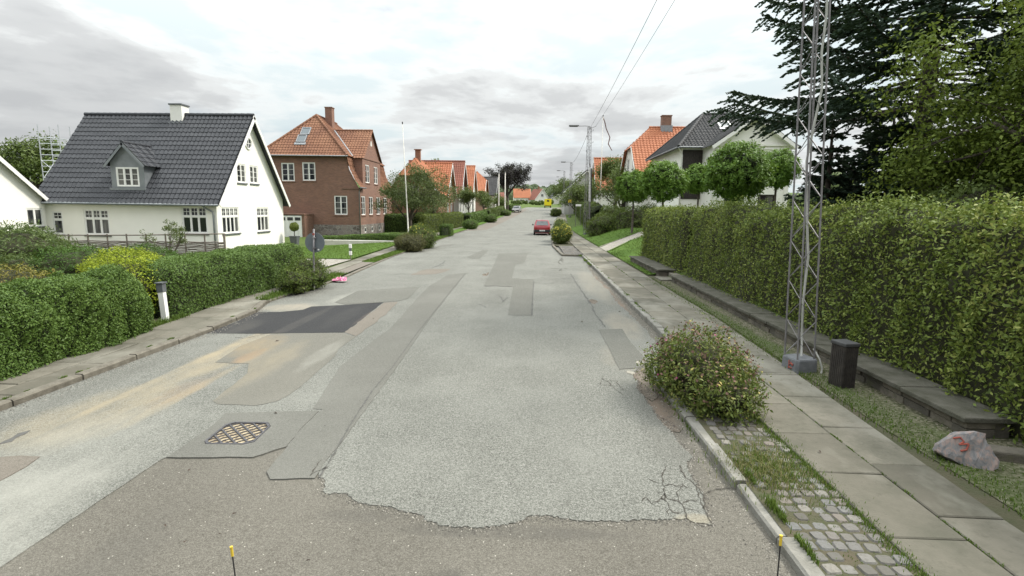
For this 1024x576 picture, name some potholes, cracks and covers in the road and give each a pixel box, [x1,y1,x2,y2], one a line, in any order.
crack [642,465,732,523]
